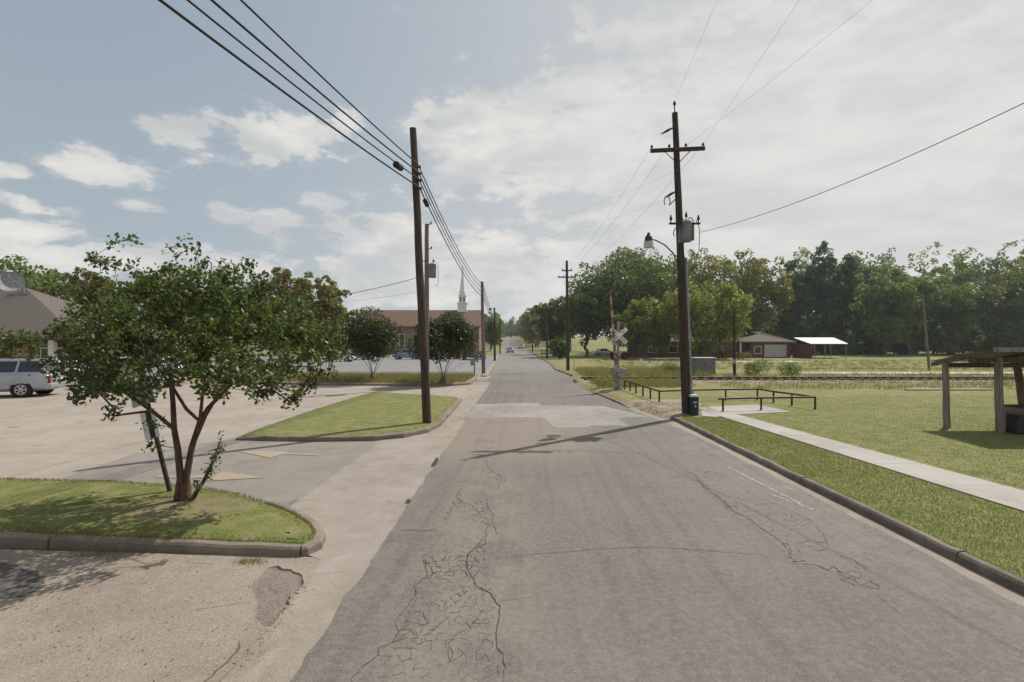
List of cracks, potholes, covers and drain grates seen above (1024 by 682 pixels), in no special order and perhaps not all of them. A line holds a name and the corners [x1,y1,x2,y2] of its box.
crack [693,471,901,614]
pothole [232,566,316,667]
crack [204,640,241,682]
crack [351,489,779,682]
